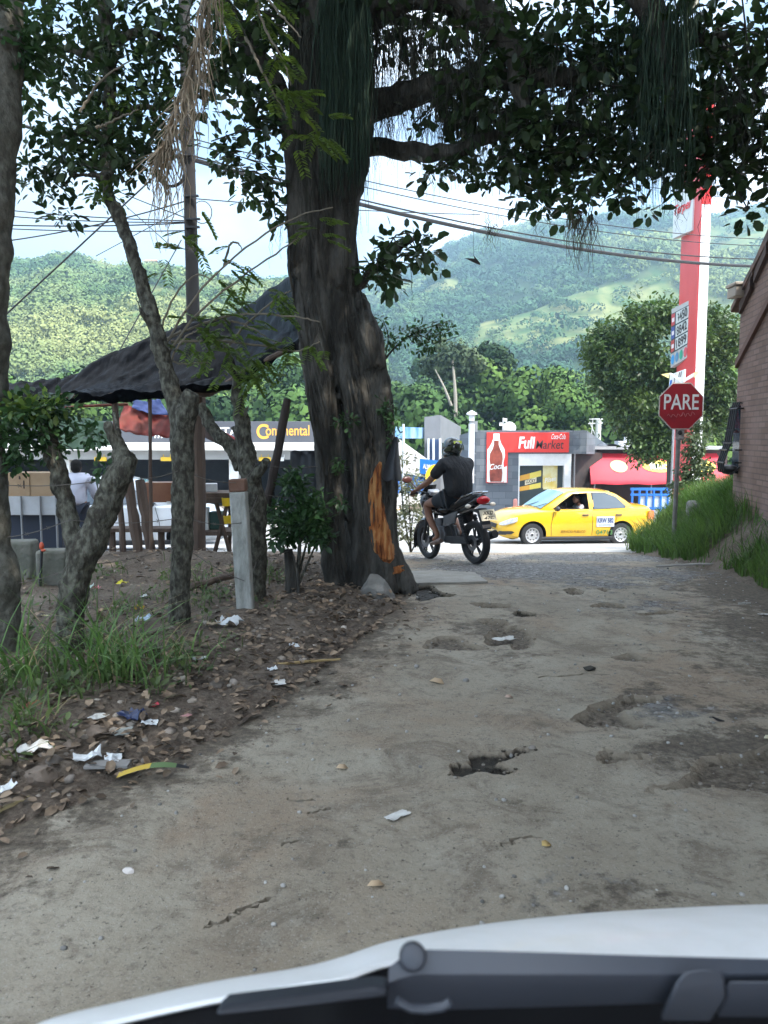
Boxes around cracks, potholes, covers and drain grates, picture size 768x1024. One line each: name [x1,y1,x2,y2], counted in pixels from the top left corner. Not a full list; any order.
pothole [643,744,768,794]
pothole [476,618,536,650]
pothole [563,587,584,595]
pothole [422,636,489,651]
pothole [447,745,538,779]
crack [204,897,272,929]
crack [499,835,543,847]
pothole [569,694,664,730]
